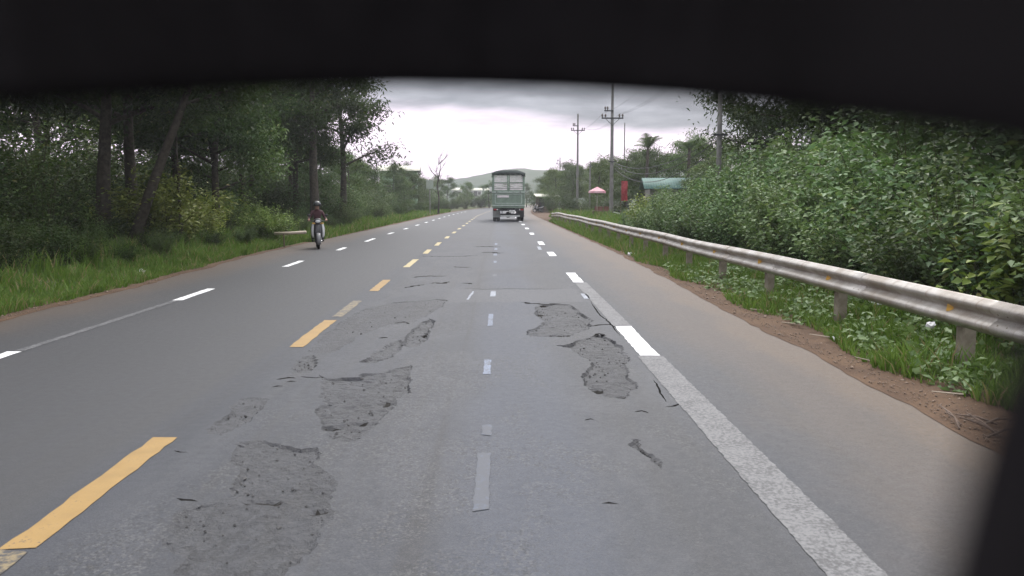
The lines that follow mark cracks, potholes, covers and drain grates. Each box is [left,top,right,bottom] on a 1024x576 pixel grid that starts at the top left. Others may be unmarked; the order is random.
pothole [307,299,448,353]
crack [635,381,679,413]
pothole [206,397,270,436]
pothole [291,355,318,373]
pothole [556,334,638,399]
pothole [314,365,413,442]
crack [590,302,620,337]
pothole [526,304,594,337]
pothole [161,440,339,576]
